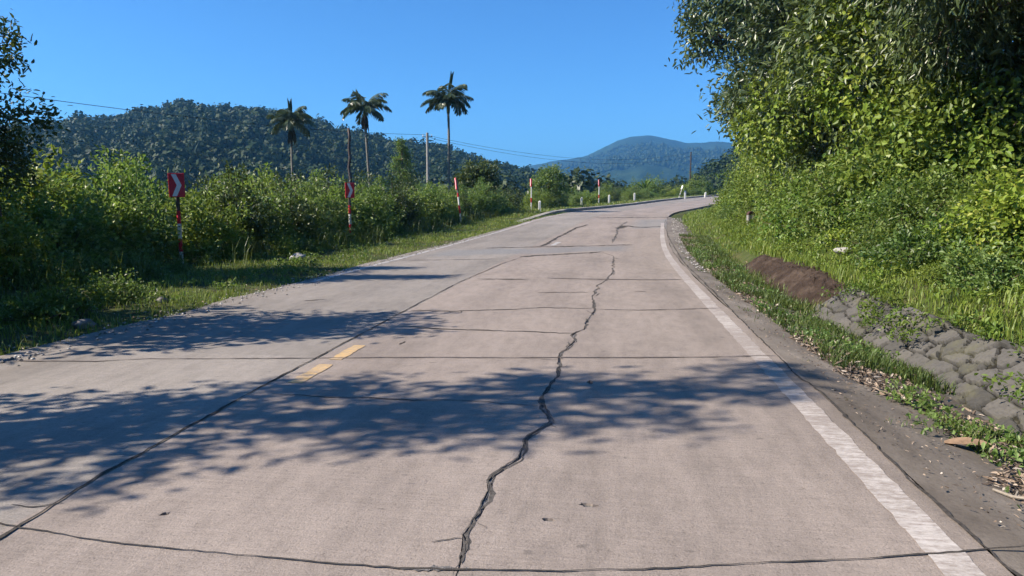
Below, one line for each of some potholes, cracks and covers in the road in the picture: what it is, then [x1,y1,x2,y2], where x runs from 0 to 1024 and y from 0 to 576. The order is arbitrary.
crack [283,217,665,576]
